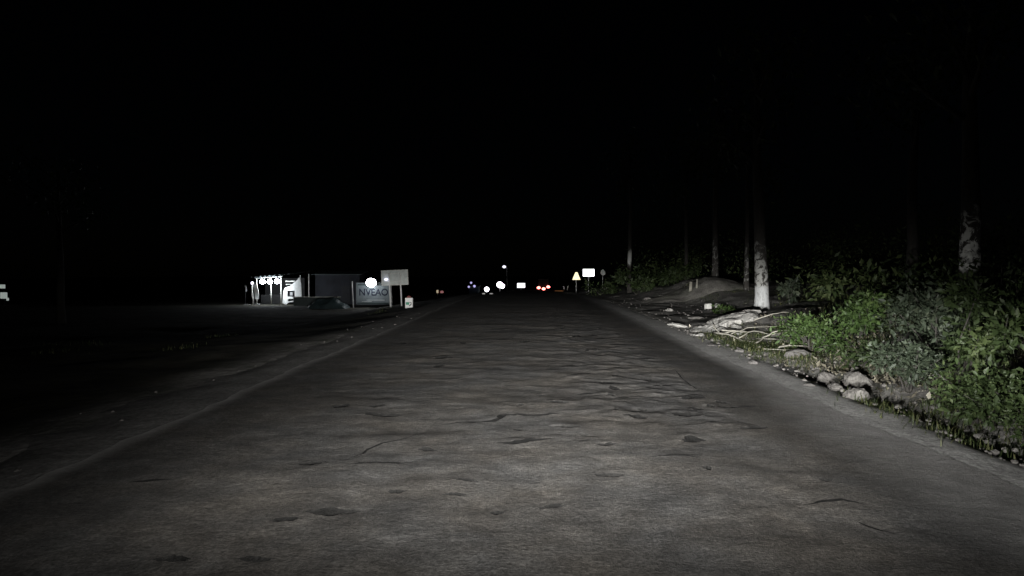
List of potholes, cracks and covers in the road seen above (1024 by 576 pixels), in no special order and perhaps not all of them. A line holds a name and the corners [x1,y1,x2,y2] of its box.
crack [341,413,572,464]
crack [803,498,895,534]
pothole [305,507,360,516]
